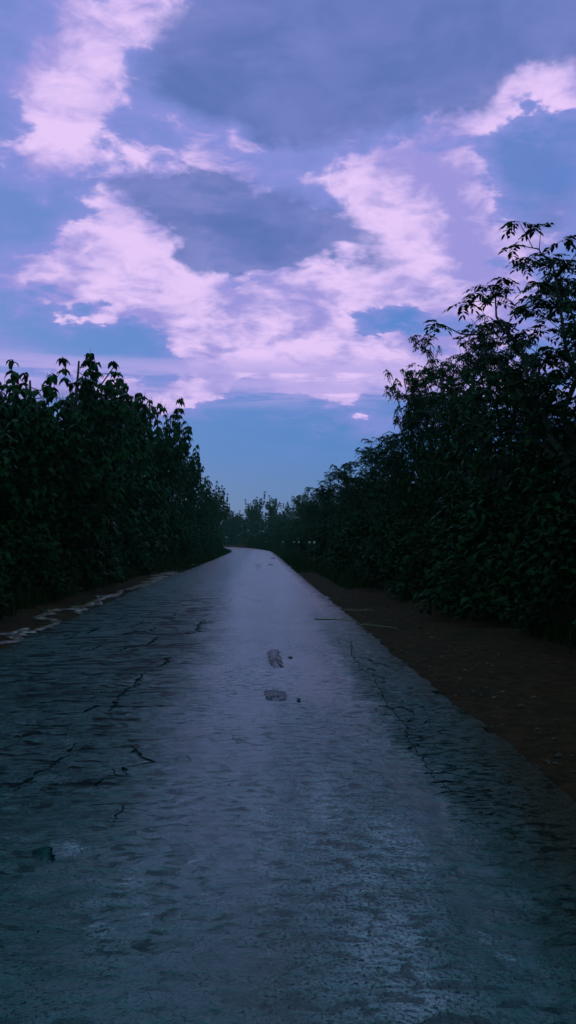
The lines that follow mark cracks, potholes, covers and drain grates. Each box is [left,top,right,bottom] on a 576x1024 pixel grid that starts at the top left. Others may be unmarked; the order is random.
crack [2,589,214,791]
pothole [32,846,56,863]
crack [85,745,156,822]
pothole [263,690,287,702]
pothole [266,649,285,668]
crack [348,635,496,824]
